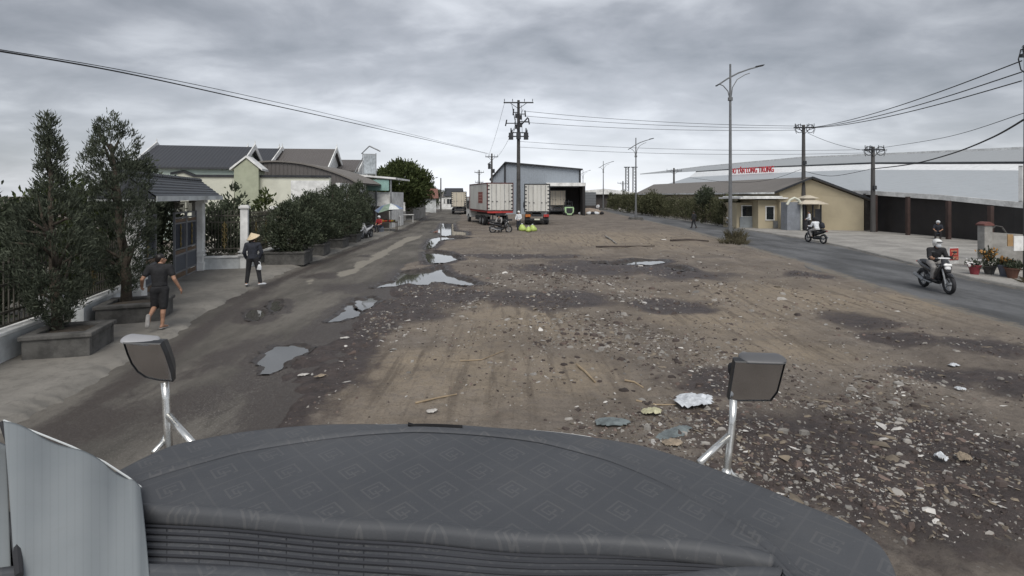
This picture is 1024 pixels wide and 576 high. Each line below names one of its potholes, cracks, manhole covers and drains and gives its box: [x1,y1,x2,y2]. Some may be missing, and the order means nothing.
pothole [349,295,383,312]
pothole [263,299,286,313]
pothole [249,343,319,375]
pothole [321,303,365,323]
pothole [421,249,462,264]
pothole [423,236,473,250]
pothole [431,223,469,236]
pothole [368,264,483,288]
